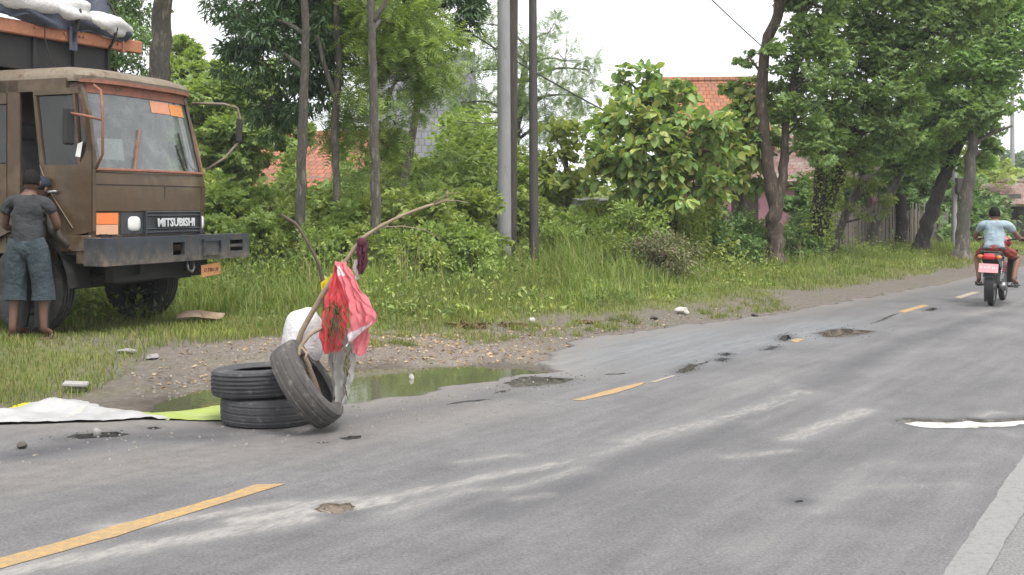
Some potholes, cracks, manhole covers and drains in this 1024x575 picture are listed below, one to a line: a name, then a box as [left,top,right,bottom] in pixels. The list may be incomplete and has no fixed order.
pothole [817,329,875,337]
pothole [503,376,573,387]
pothole [315,503,356,514]
